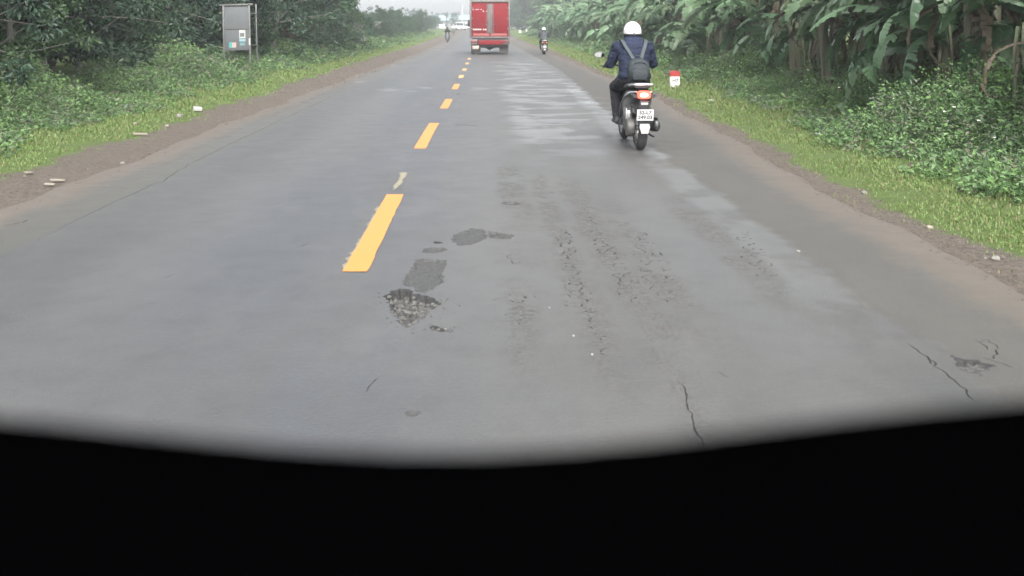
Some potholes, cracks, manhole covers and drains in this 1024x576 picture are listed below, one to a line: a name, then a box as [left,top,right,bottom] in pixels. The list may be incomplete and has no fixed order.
crack [495,294,536,324]
pothole [950,355,997,376]
pothole [374,283,461,329]
crack [677,380,700,436]
crack [580,209,679,302]
crack [973,339,1012,368]
crack [909,344,977,402]
pothole [412,325,455,334]
crack [556,230,607,355]
